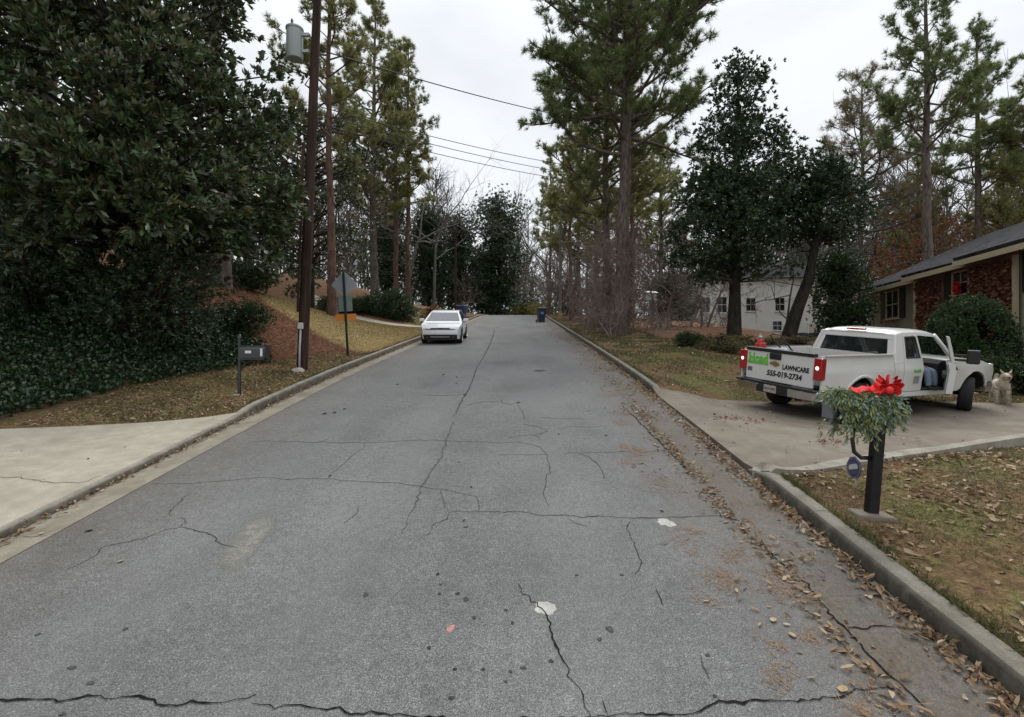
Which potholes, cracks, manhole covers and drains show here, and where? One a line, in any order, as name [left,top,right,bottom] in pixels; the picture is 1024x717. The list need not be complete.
crack [0,538,926,717]
crack [68,400,717,605]
